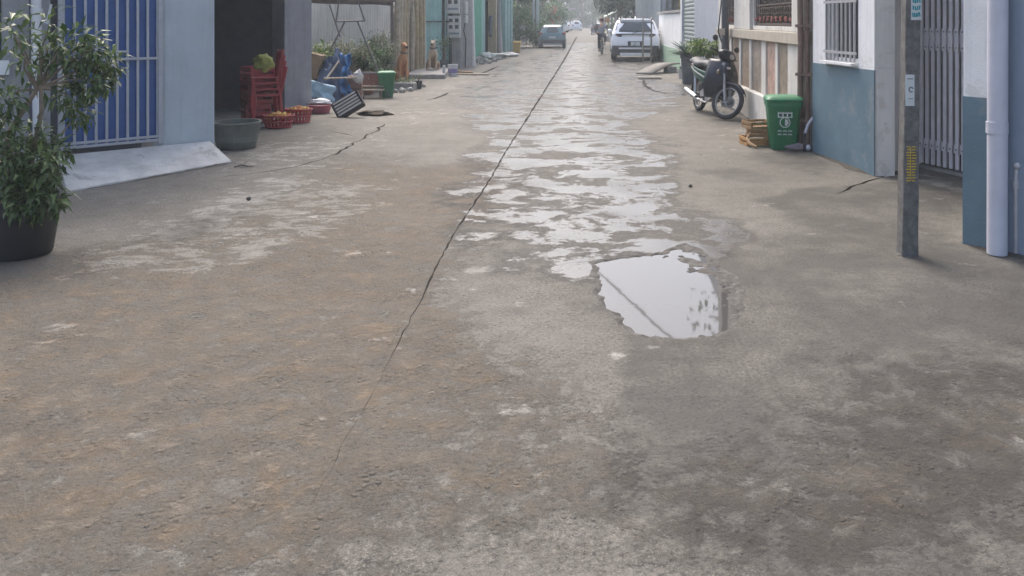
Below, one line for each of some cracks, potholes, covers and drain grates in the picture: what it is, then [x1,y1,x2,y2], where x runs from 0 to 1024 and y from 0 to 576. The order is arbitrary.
crack [840,173,898,193]
crack [219,124,385,178]
pothole [588,243,748,340]
crack [310,37,577,506]
